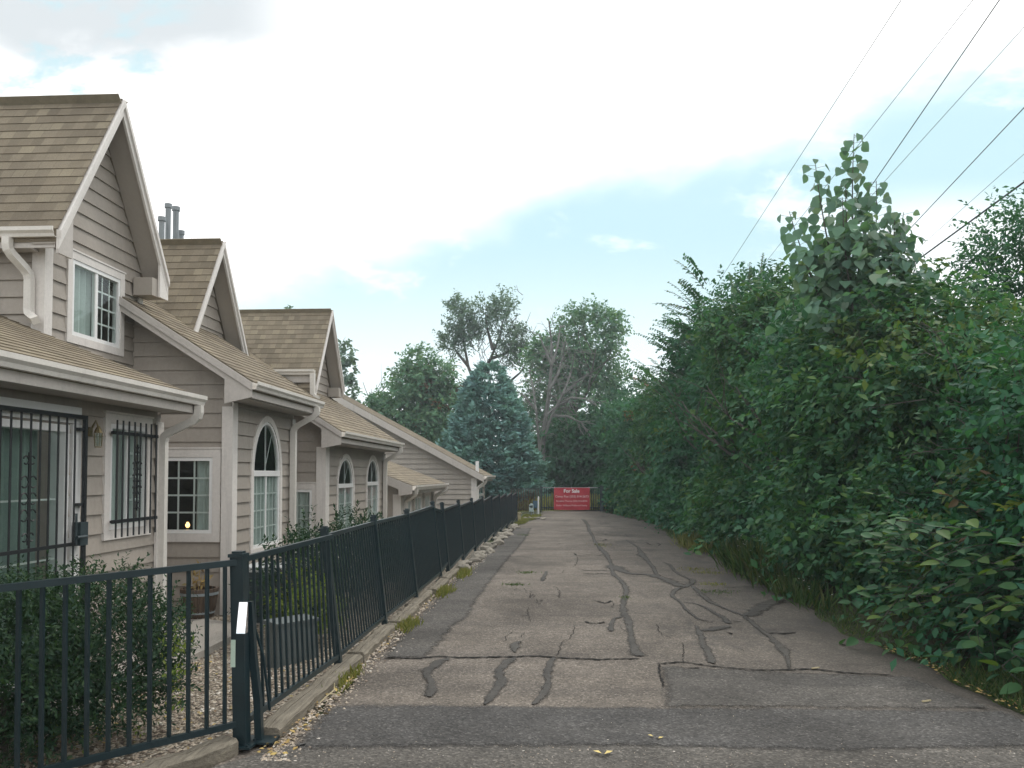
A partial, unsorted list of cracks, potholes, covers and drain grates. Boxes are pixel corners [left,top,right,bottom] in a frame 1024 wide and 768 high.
crack [558,600,628,654]
crack [505,521,611,641]
